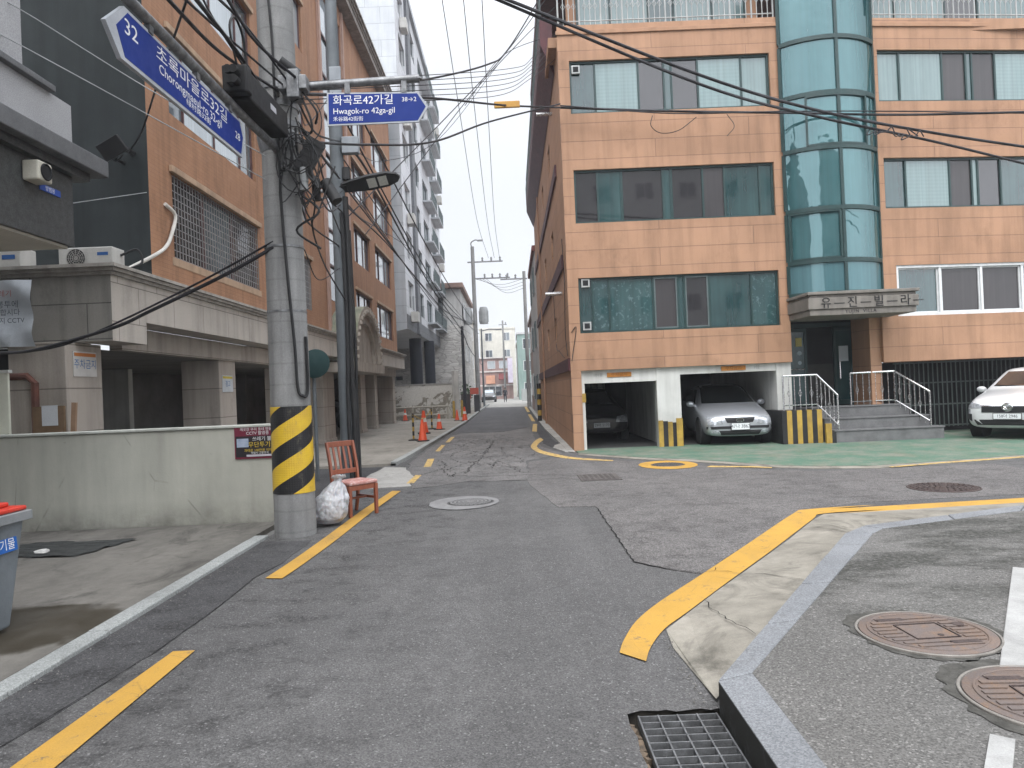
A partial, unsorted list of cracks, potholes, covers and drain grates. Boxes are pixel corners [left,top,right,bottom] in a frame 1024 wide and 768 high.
manhole cover [843,610,1005,662]
manhole cover [429,496,499,510]
drain grate [627,708,752,768]
manhole cover [935,659,1024,735]
manhole cover [906,482,982,493]
crack [421,428,568,480]
